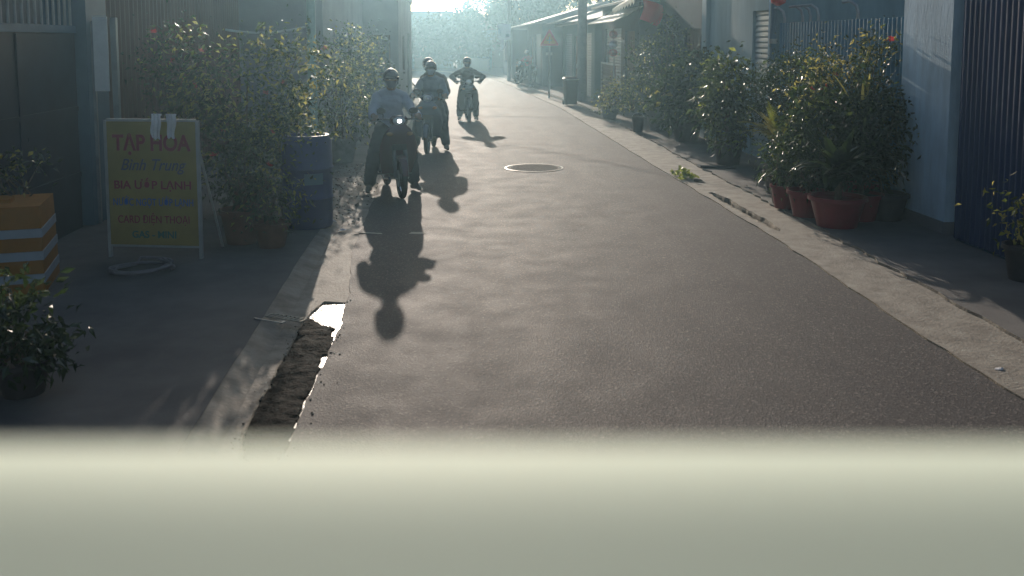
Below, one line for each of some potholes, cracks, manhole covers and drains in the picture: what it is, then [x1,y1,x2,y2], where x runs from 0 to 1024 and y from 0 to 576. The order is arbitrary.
manhole cover [505,164,563,172]
pothole [231,300,352,445]
